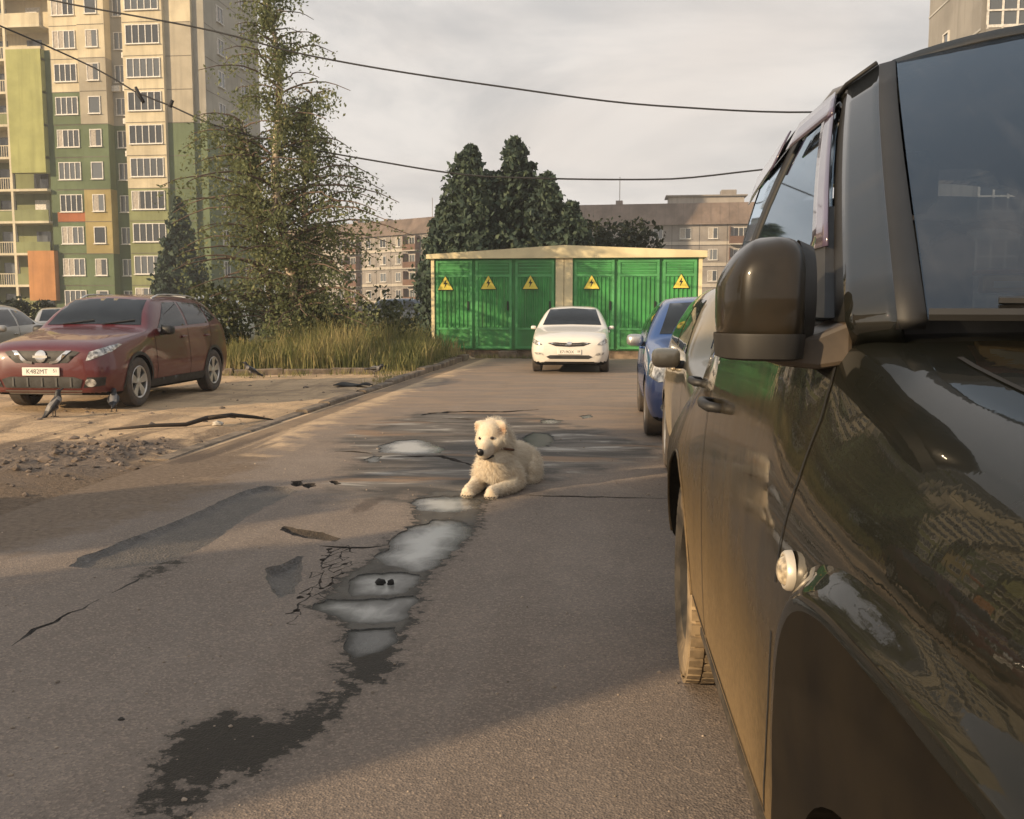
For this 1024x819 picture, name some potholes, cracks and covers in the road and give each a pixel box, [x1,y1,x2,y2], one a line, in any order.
pothole [373,519,474,572]
crack [286,545,381,625]
pothole [343,627,399,658]
pothole [410,495,484,513]
crack [12,578,140,646]
crack [421,409,539,420]
pothole [280,526,341,542]
pothole [378,439,446,454]
pothole [348,572,422,597]
pothole [522,432,556,447]
pothole [312,595,421,625]
